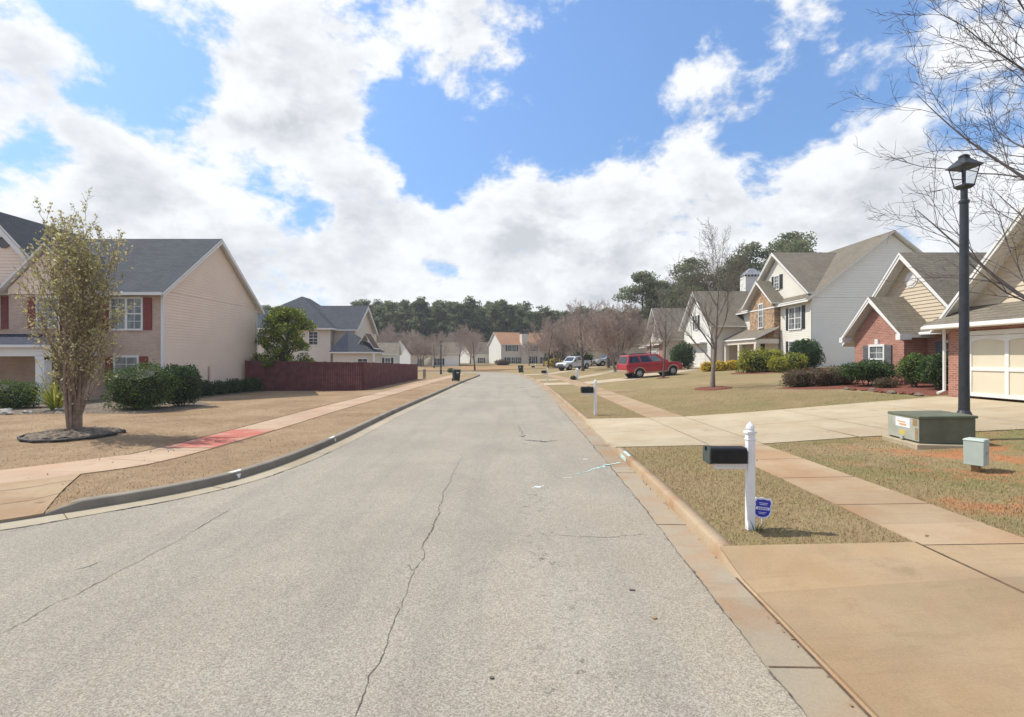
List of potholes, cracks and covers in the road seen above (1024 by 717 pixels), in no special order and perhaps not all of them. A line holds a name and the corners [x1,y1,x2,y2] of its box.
crack [354,461,460,717]
